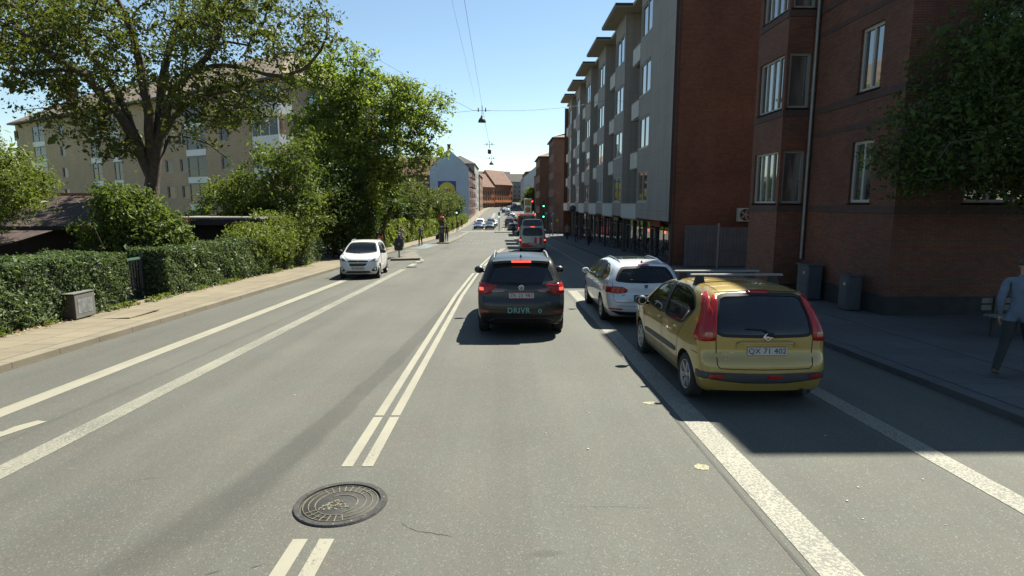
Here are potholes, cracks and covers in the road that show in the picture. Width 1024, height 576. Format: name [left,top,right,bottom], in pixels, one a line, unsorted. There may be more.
manhole cover [292,482,388,528]
